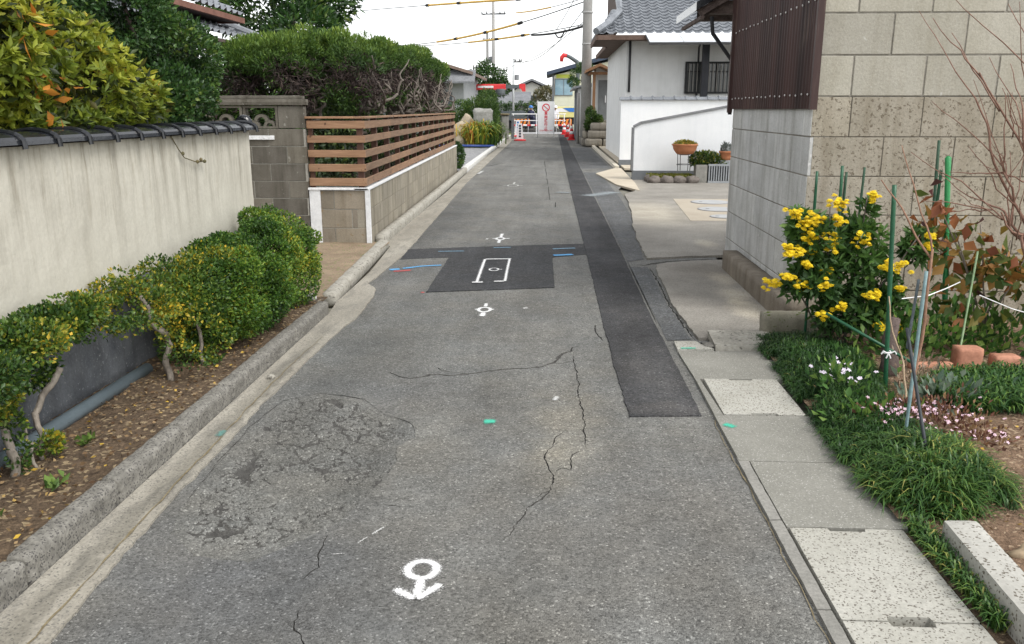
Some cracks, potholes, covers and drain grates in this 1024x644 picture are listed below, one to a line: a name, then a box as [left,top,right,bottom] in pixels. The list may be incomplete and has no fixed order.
crack [293,535,328,644]
crack [390,347,586,536]
